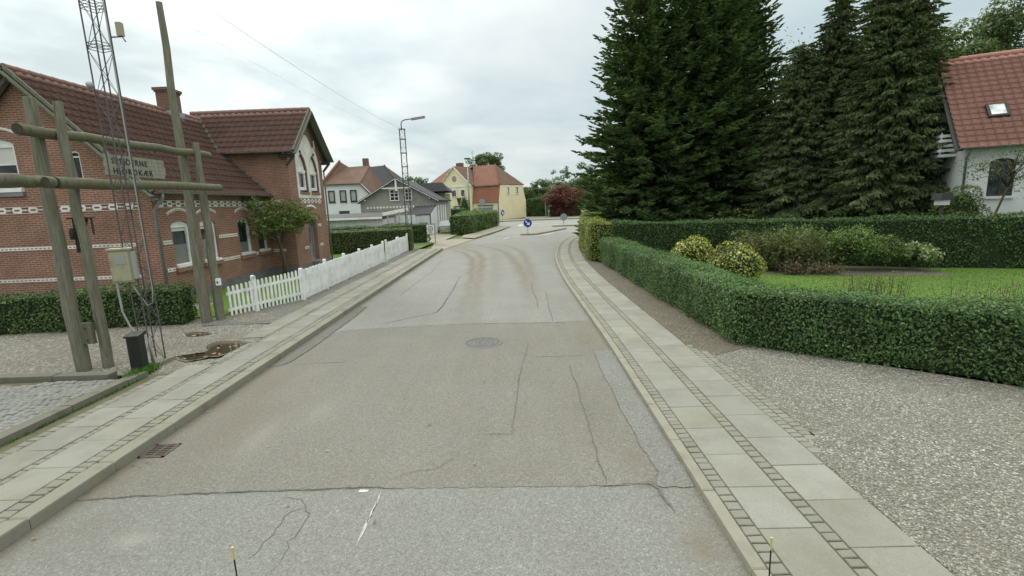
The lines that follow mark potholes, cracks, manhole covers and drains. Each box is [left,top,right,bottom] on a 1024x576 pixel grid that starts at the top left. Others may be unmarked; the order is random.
crack [490,345,676,513]
manhole cover [462,337,503,349]
crack [250,497,310,568]
pothole [176,340,254,362]
drain grate [137,443,182,459]
